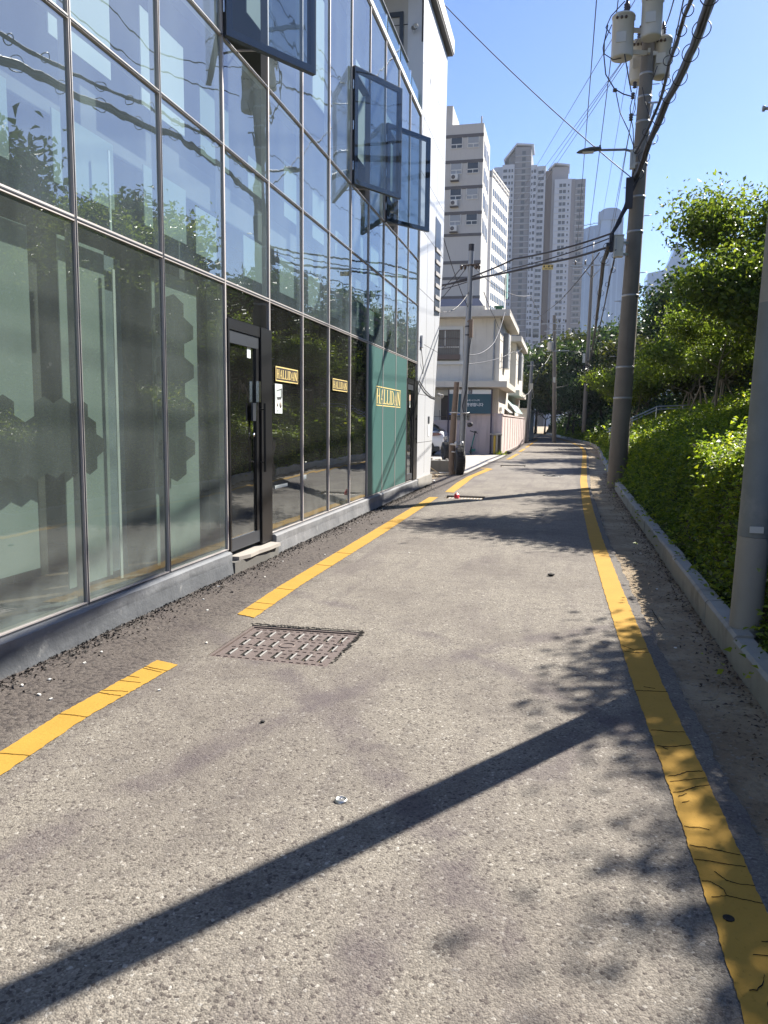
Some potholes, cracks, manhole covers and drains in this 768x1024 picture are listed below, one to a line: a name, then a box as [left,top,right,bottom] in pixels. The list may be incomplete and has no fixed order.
manhole cover [209,626,359,667]
crack [686,826,760,903]
crack [99,666,168,696]
crack [669,771,710,803]
